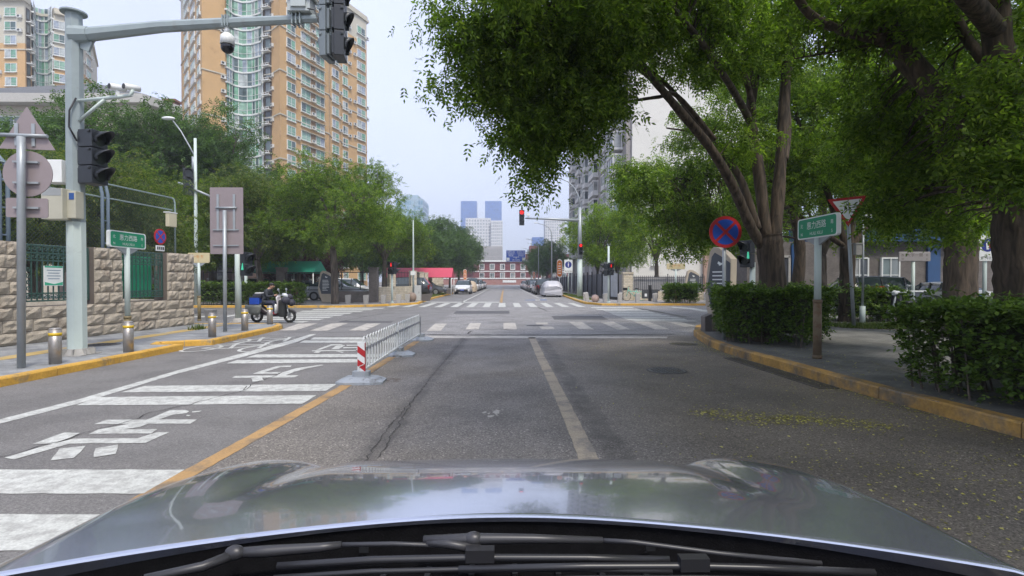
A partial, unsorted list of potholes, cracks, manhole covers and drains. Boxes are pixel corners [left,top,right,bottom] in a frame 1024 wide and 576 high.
crack [365,340,463,461]
